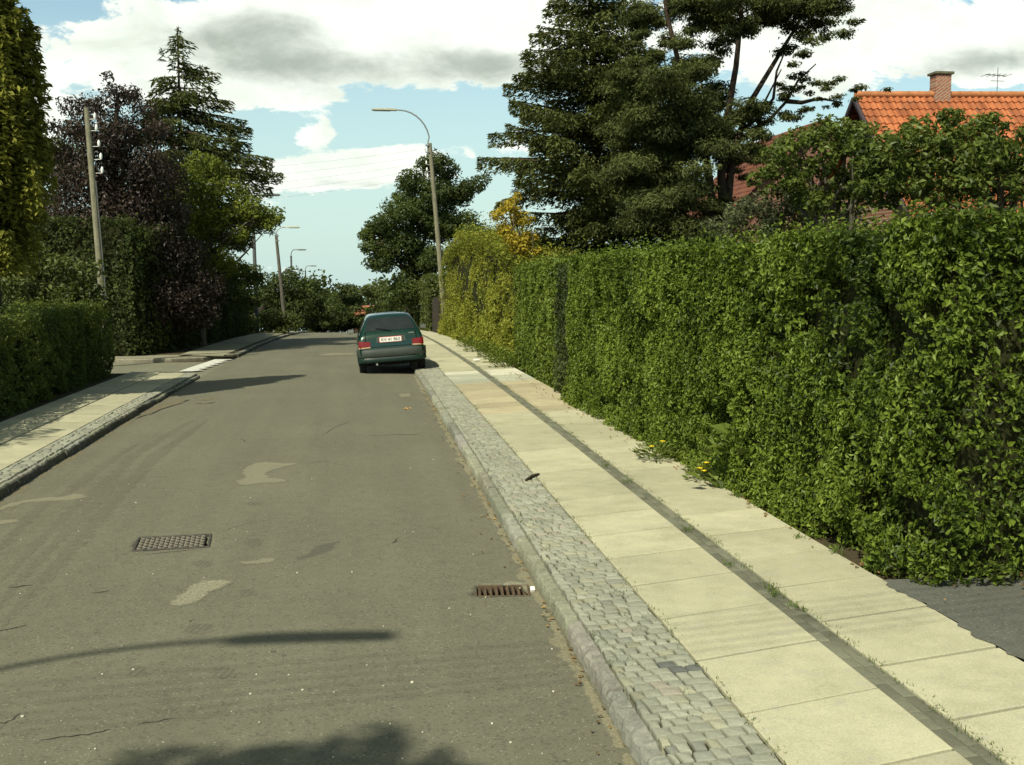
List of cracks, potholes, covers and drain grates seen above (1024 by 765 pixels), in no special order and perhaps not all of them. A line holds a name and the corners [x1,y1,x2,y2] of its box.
crack [43,729,109,740]
drain grate [474,585,531,597]
